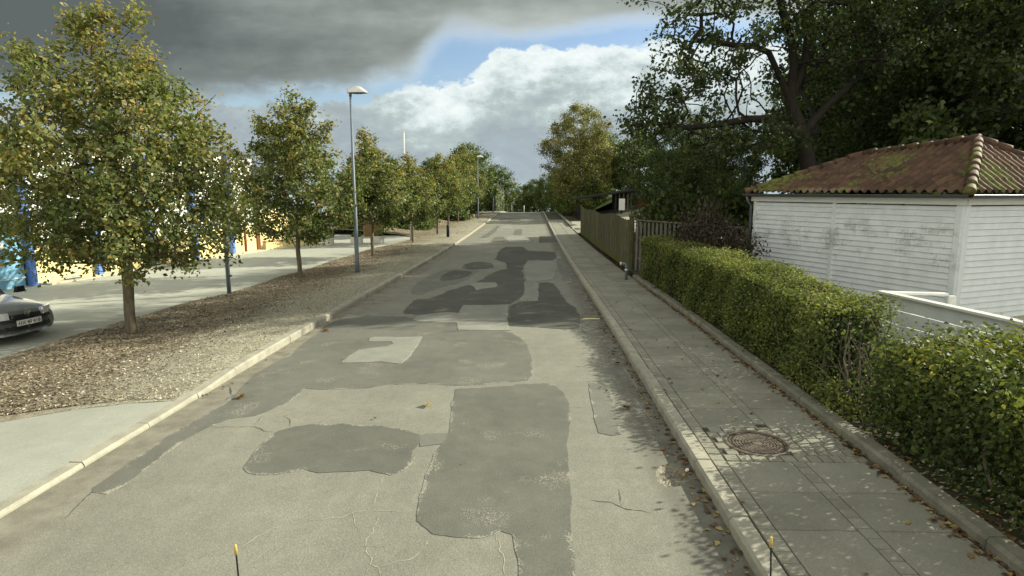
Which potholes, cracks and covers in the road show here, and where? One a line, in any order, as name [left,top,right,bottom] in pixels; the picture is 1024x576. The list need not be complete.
crack [238,477,435,575]
pothole [656,463,690,487]
manhole cover [723,430,792,457]
